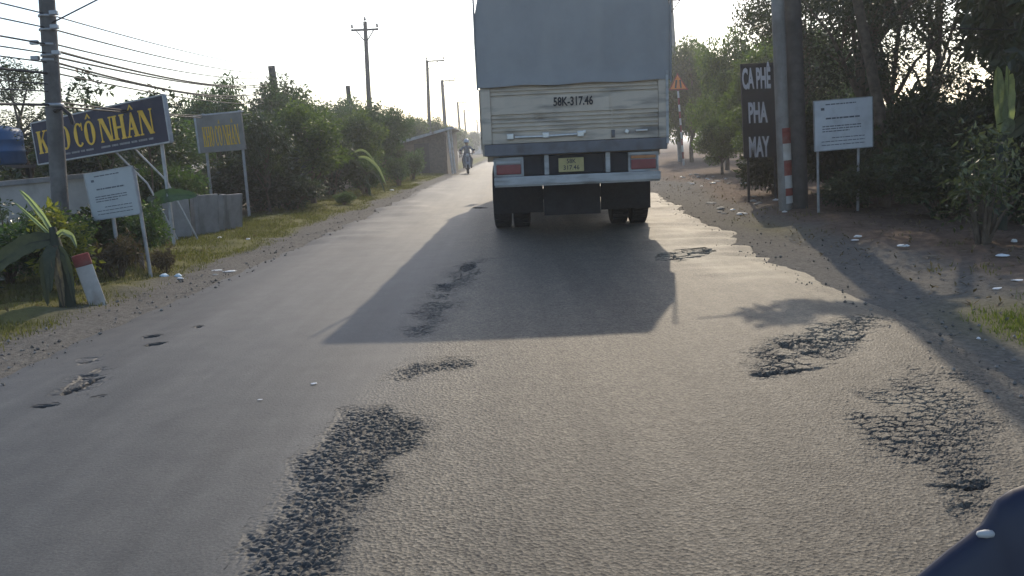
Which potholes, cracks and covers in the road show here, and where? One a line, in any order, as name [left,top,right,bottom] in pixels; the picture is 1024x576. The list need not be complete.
crack [733,310,1024,534]
